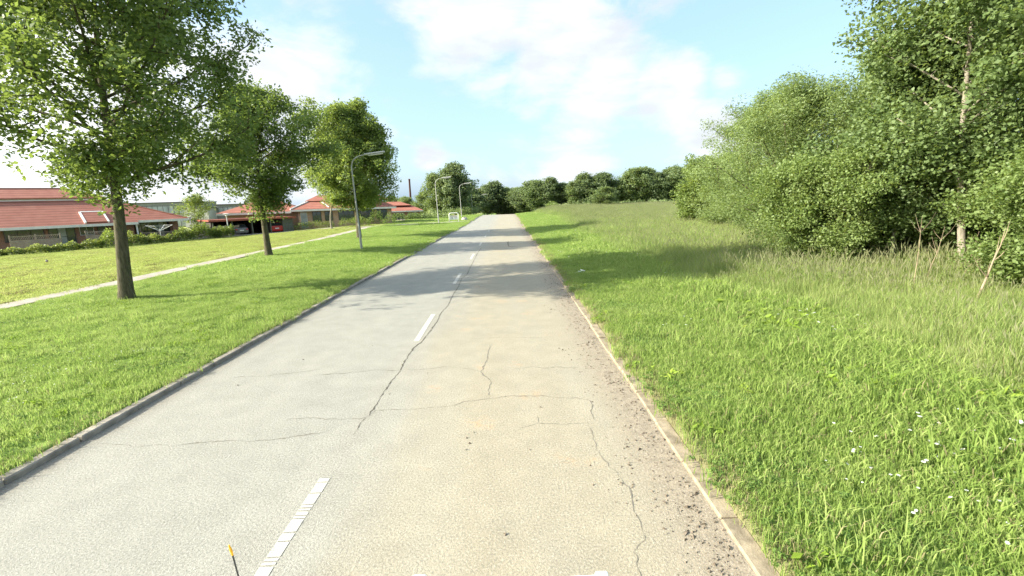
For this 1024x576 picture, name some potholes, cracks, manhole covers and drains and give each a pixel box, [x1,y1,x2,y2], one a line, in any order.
crack [246,337,645,575]
crack [115,417,366,447]
